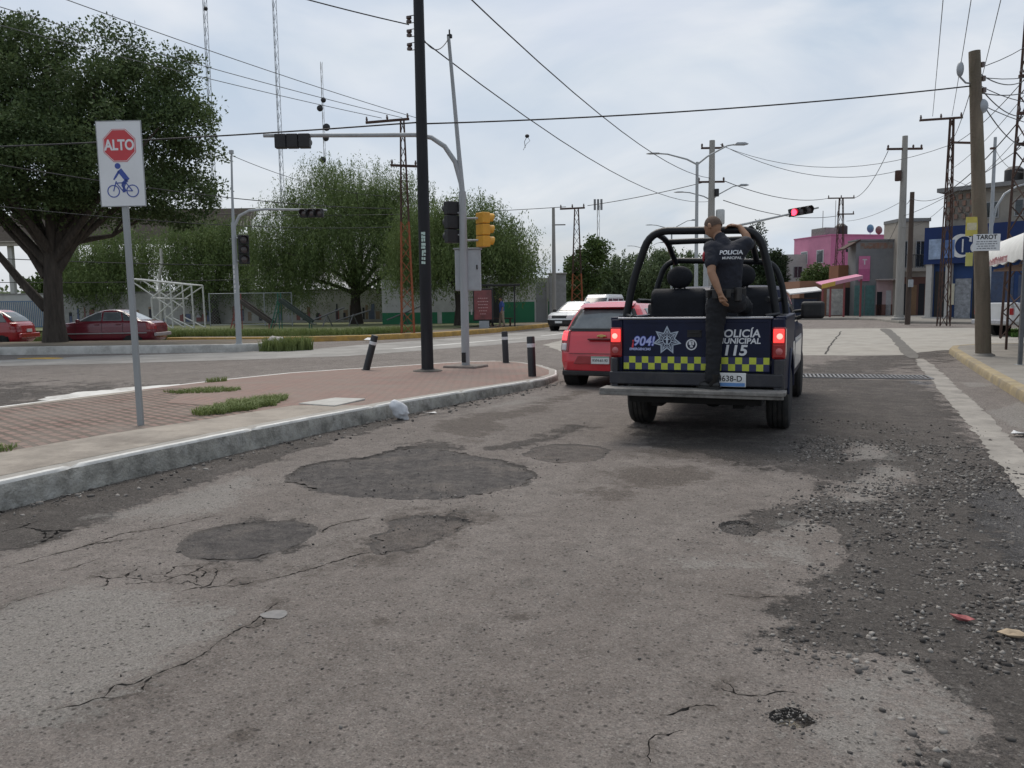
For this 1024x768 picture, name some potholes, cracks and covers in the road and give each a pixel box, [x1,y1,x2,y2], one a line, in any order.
crack [2,517,252,592]
pothole [718,520,760,536]
crack [48,603,277,711]
pothole [769,707,816,728]
crack [647,679,795,763]
